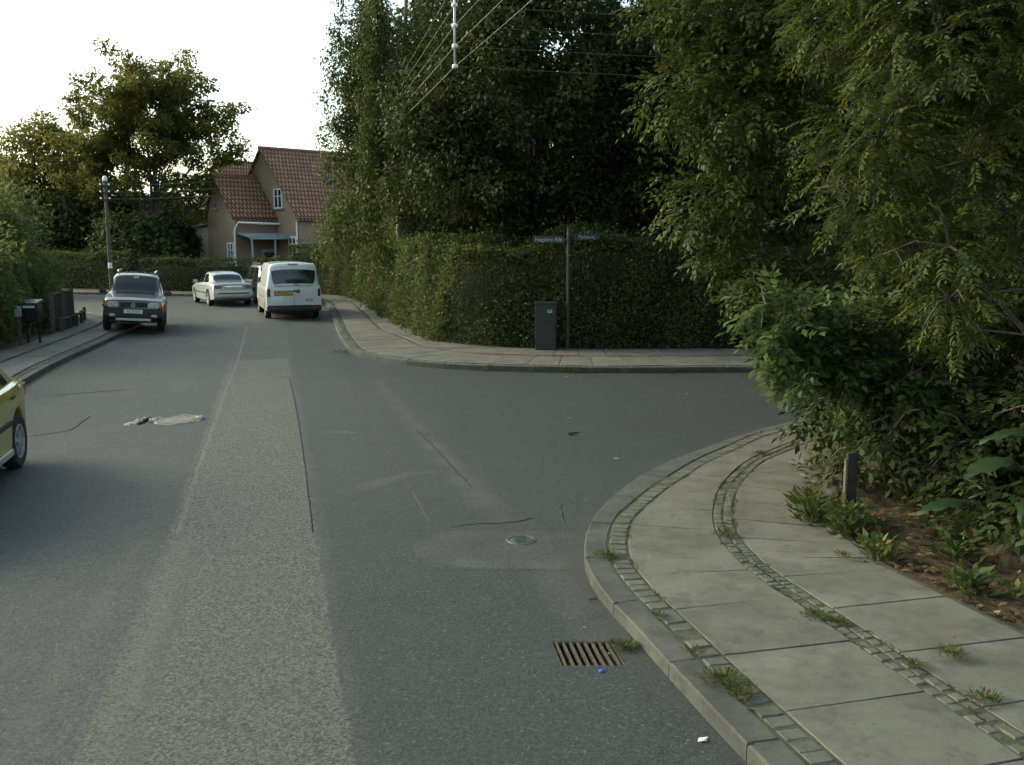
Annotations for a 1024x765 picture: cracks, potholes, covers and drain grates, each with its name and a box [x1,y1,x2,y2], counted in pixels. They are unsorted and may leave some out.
utility cover [507,535,537,545]
crack [27,416,91,437]
drain grate [551,642,626,666]
crack [341,381,474,518]
crack [450,517,536,527]
